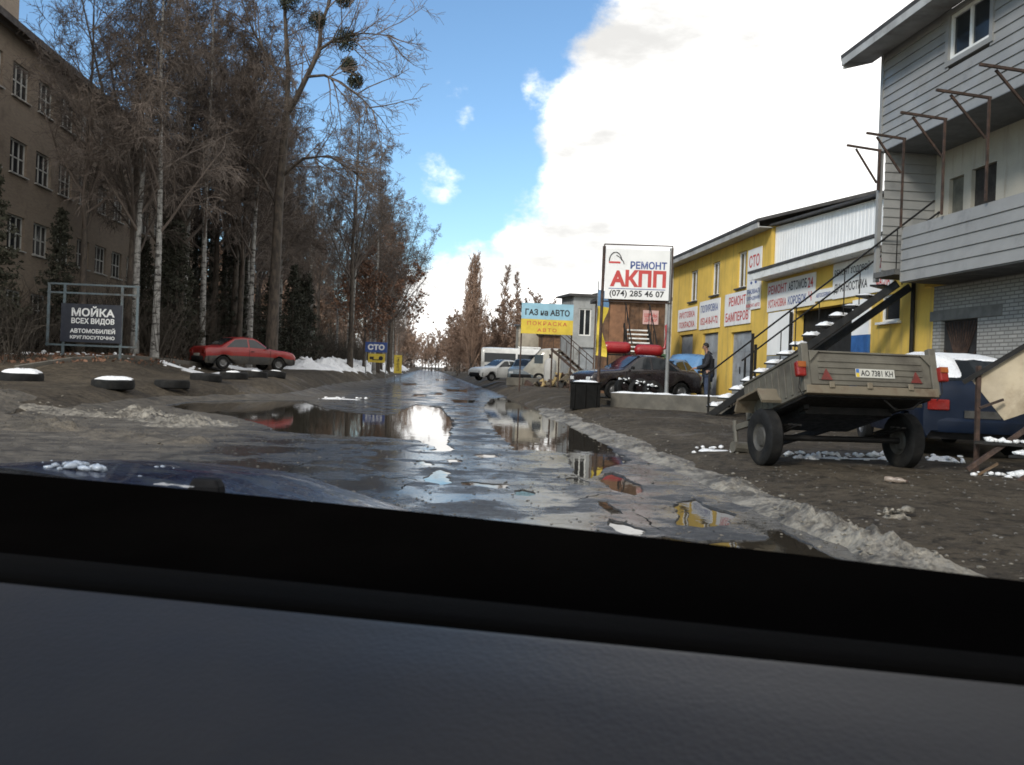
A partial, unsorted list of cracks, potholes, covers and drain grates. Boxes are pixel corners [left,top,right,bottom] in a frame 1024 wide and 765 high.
pothole [673,498,737,528]
pothole [482,393,631,478]
crack [578,493,670,533]
pothole [166,400,457,451]
pothole [423,469,453,485]
pothole [598,471,644,497]
